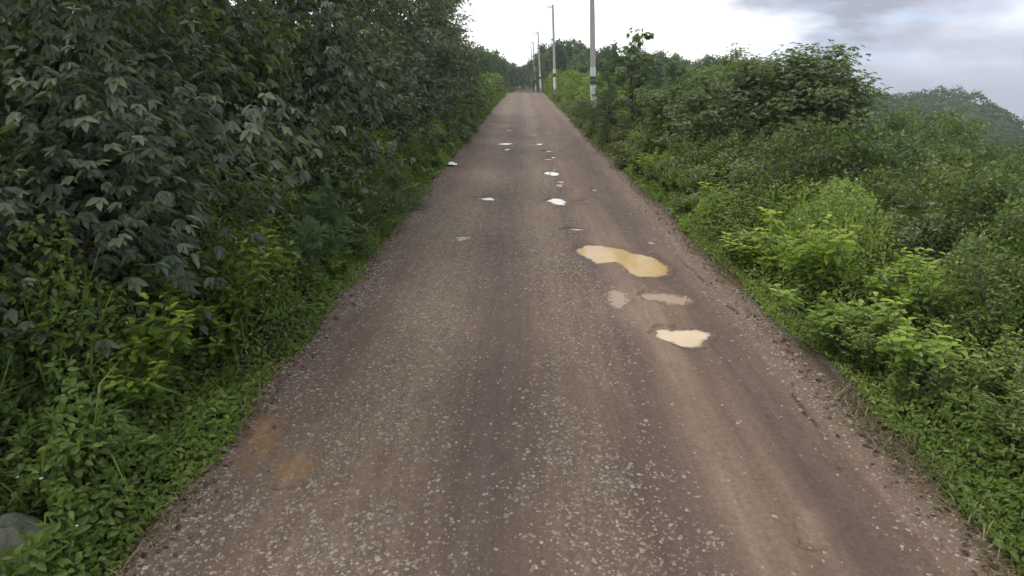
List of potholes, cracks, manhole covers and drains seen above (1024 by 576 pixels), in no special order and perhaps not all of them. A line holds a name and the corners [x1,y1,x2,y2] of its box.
pothole [542,197,569,206]
pothole [599,288,637,311]
pothole [569,243,679,280]
pothole [646,323,719,350]
pothole [629,289,701,308]
crack [790,388,820,427]
